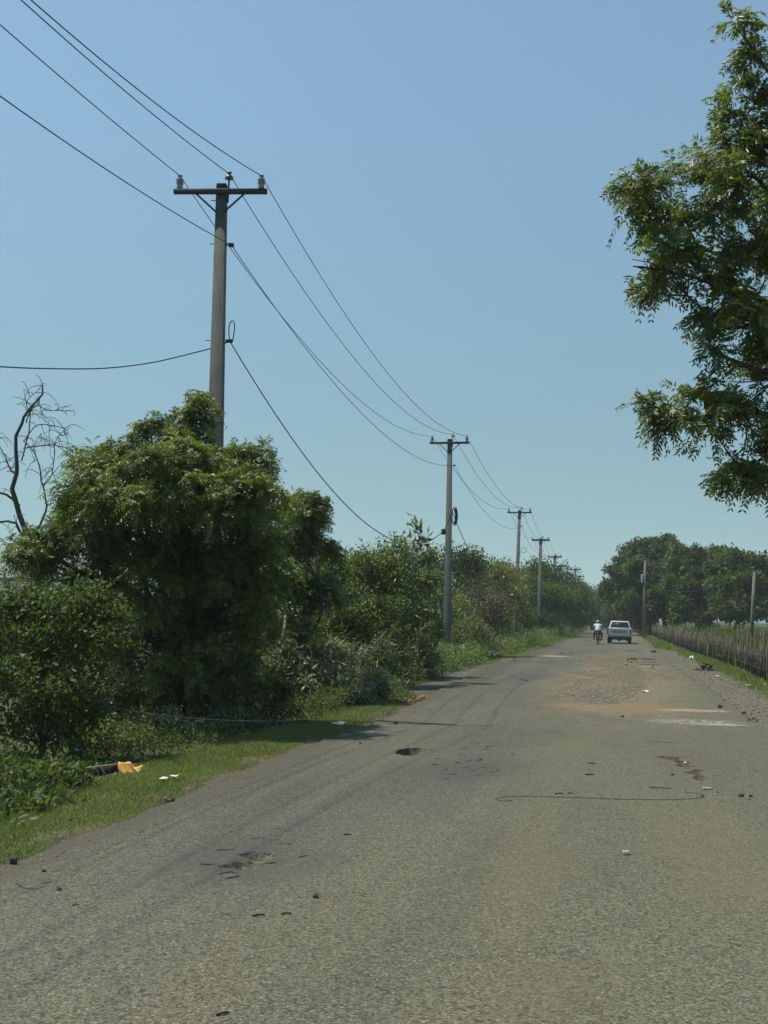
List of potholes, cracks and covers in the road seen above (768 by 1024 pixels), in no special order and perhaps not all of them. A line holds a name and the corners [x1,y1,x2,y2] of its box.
pothole [218,851,283,870]
pothole [395,748,435,756]
pothole [656,756,709,781]
